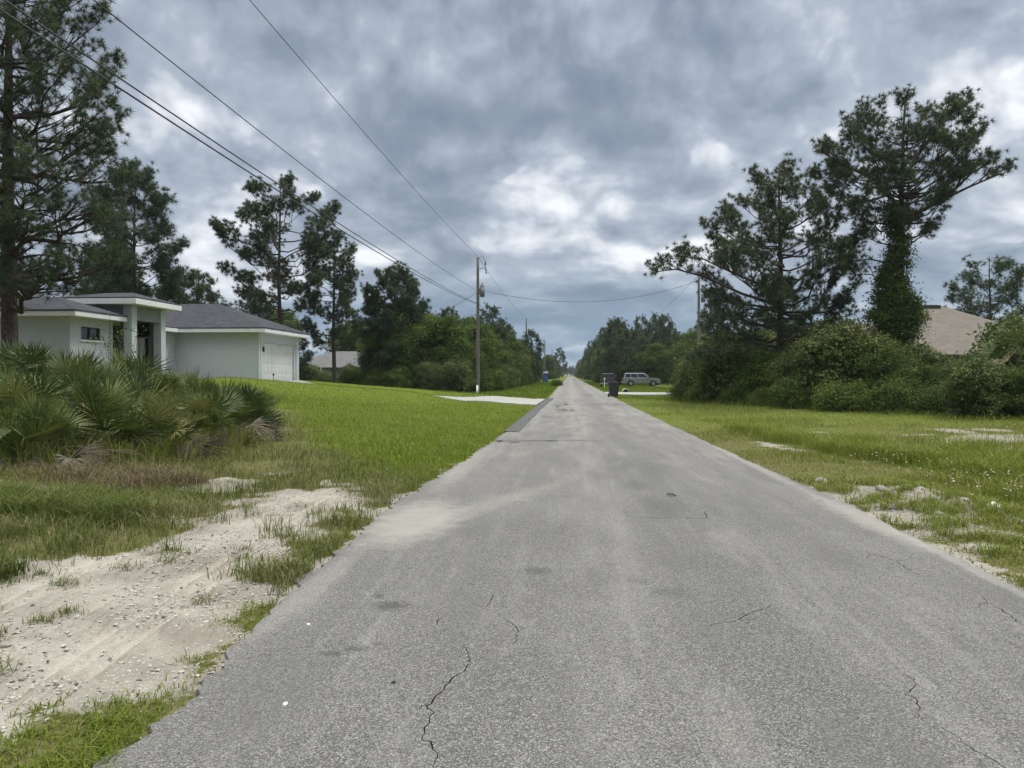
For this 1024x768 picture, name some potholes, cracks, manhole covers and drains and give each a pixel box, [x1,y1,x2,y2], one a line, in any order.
crack [419,647,484,765]
crack [903,673,921,718]
